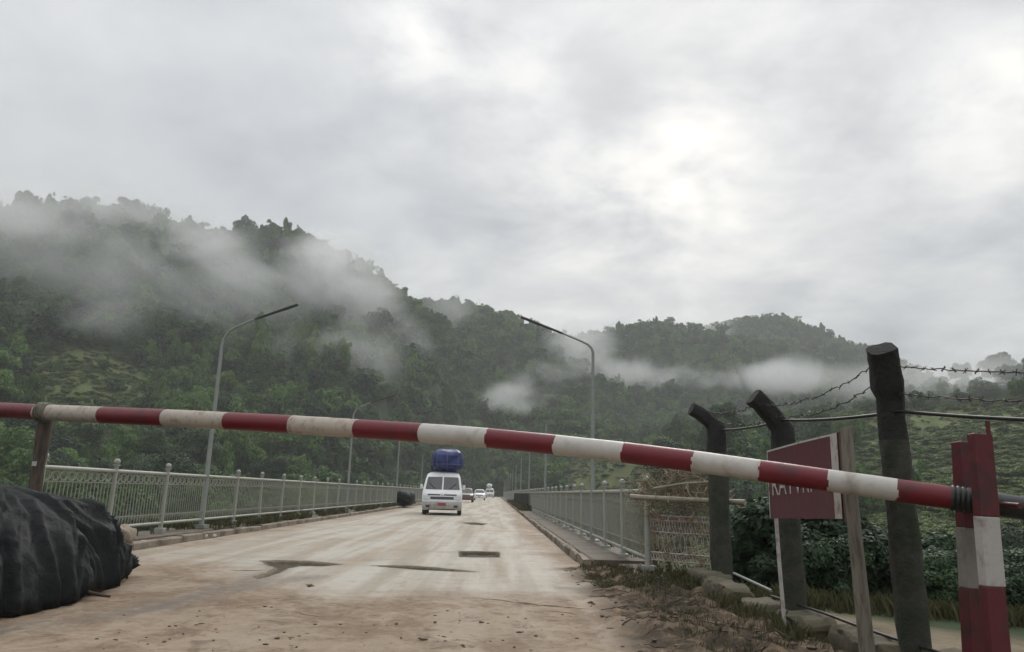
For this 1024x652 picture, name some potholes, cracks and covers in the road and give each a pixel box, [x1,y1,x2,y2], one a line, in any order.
pothole [253,560,344,579]
